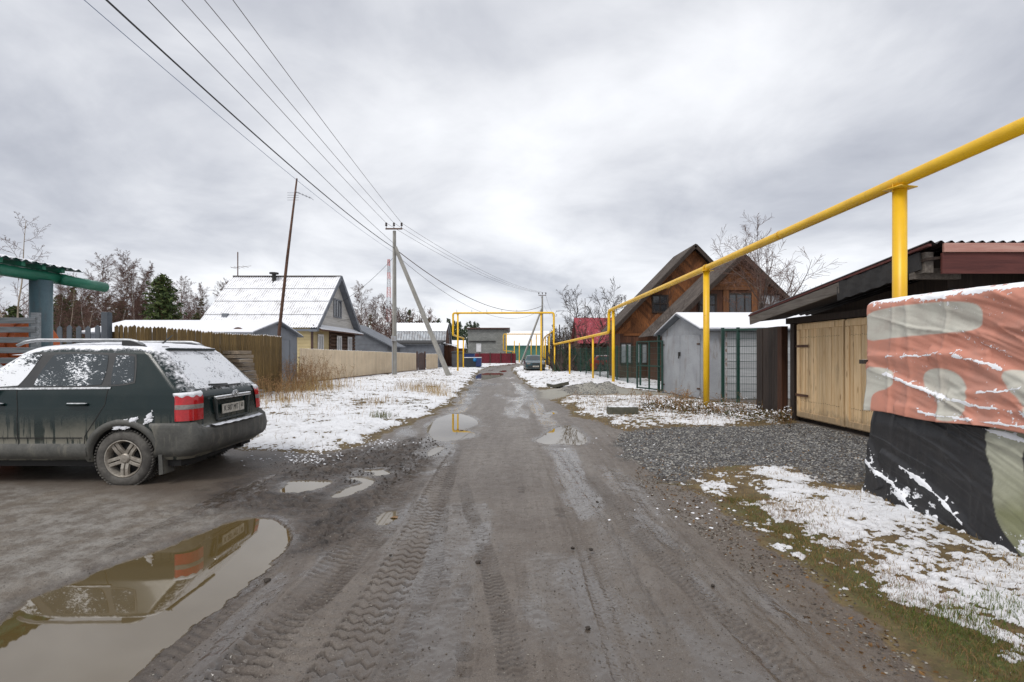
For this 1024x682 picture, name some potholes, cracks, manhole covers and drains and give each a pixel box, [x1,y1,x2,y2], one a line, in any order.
pothole [329,475,376,498]
pothole [0,516,293,682]
pothole [373,509,400,525]
pothole [535,425,588,445]
pothole [426,413,479,442]
pothole [278,479,334,493]
